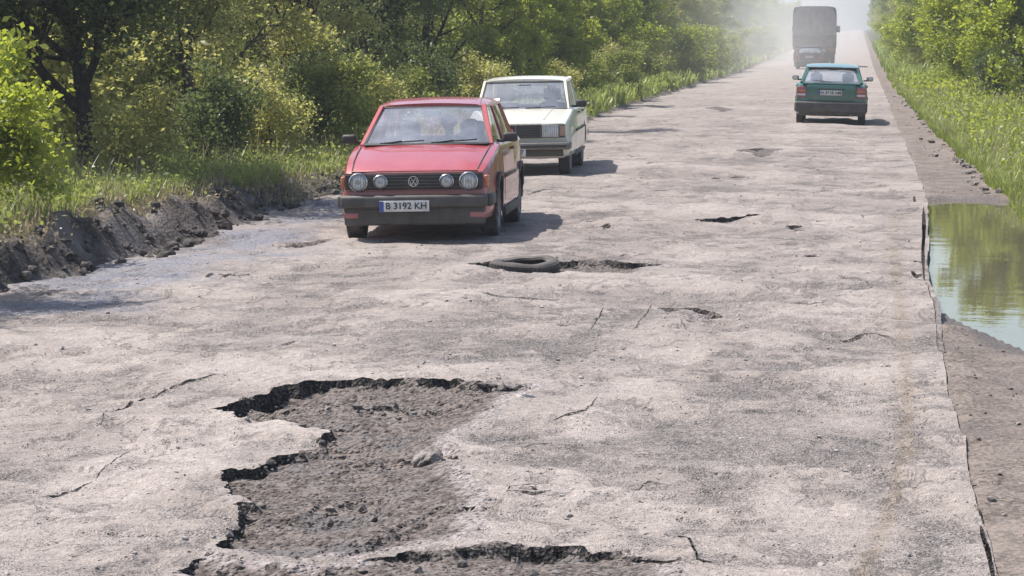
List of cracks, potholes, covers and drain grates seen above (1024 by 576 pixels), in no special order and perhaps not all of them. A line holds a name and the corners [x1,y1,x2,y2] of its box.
crack [553,396,598,420]
crack [41,451,130,498]
crack [664,534,713,563]
pothole [213,377,547,561]
pothole [466,259,674,274]
crack [101,374,227,424]
pothole [656,307,729,320]
crack [830,332,896,343]
pothole [736,148,784,157]
pothole [170,541,694,576]
pothole [691,213,768,223]
